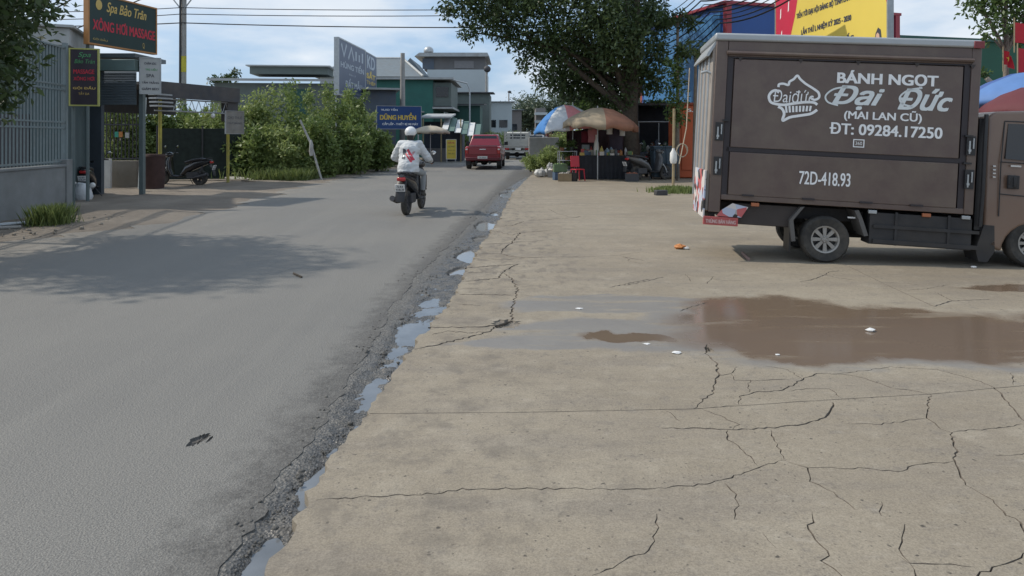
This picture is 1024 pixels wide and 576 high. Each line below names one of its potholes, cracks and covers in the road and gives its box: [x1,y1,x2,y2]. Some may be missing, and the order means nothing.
crack [414,210,580,350]
crack [807,514,842,576]
crack [594,514,659,575]
pothole [186,433,211,447]
crack [320,345,1024,532]
crack [879,504,1024,576]
pothole [336,368,391,423]
pothole [236,530,286,576]
pothole [385,321,415,359]
